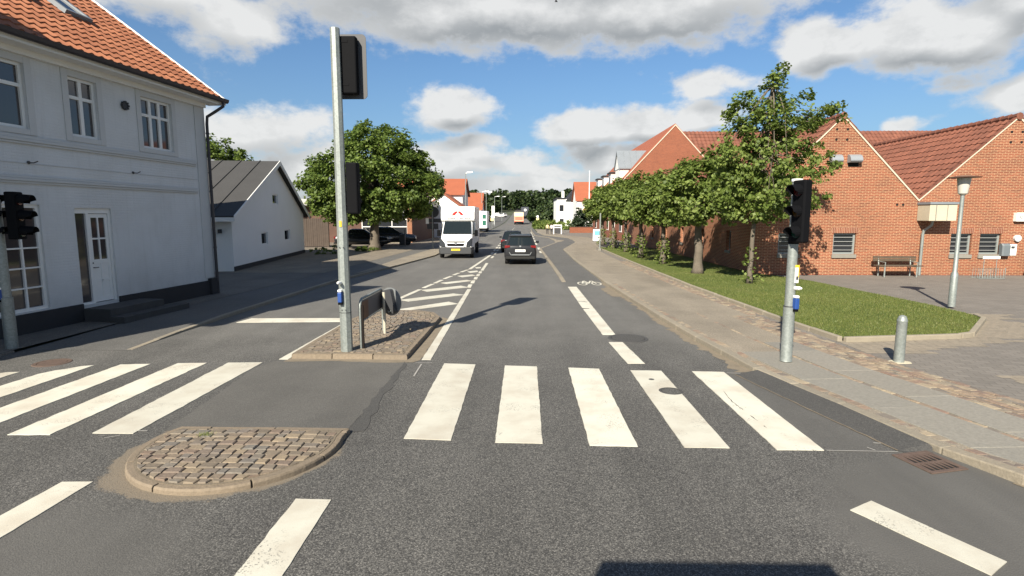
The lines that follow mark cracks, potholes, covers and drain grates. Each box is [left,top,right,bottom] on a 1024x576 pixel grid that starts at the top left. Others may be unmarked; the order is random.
drain grate [892,450,969,474]
manhole cover [659,387,684,395]
manhole cover [608,334,648,343]
manhole cover [31,358,73,367]
